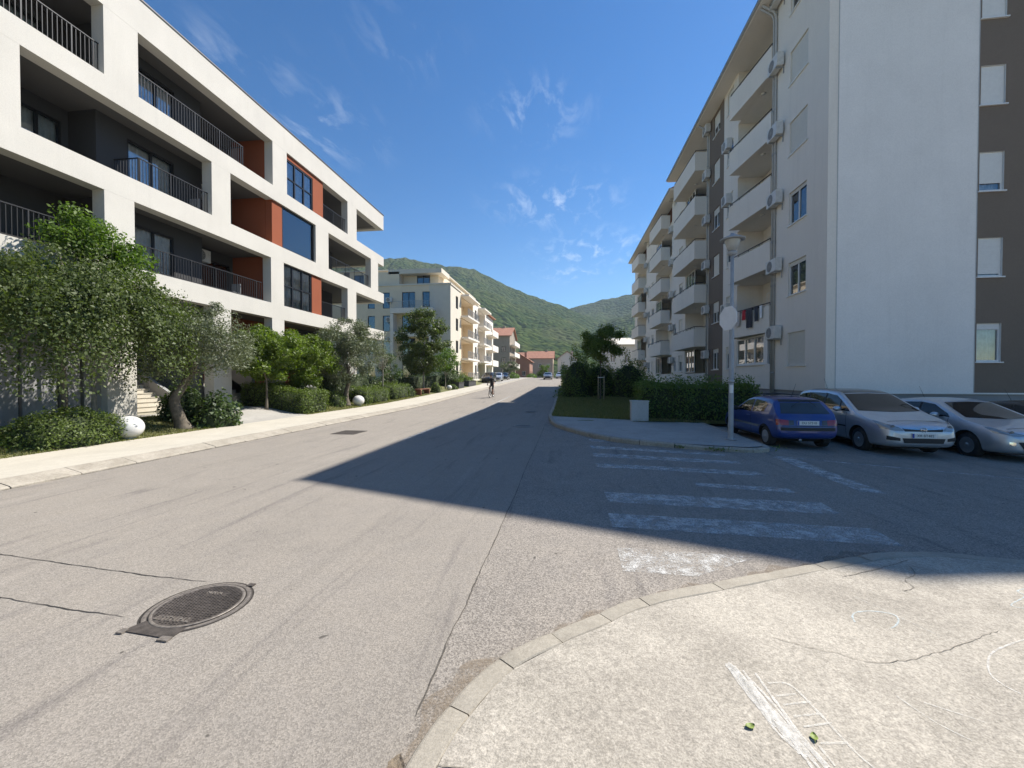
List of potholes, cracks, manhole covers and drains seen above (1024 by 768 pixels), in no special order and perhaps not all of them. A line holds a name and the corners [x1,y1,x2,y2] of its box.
crack [1,597,124,617]
crack [774,630,999,663]
manhole cover [115,582,256,642]
crack [1,554,208,582]
crack [846,560,915,591]
